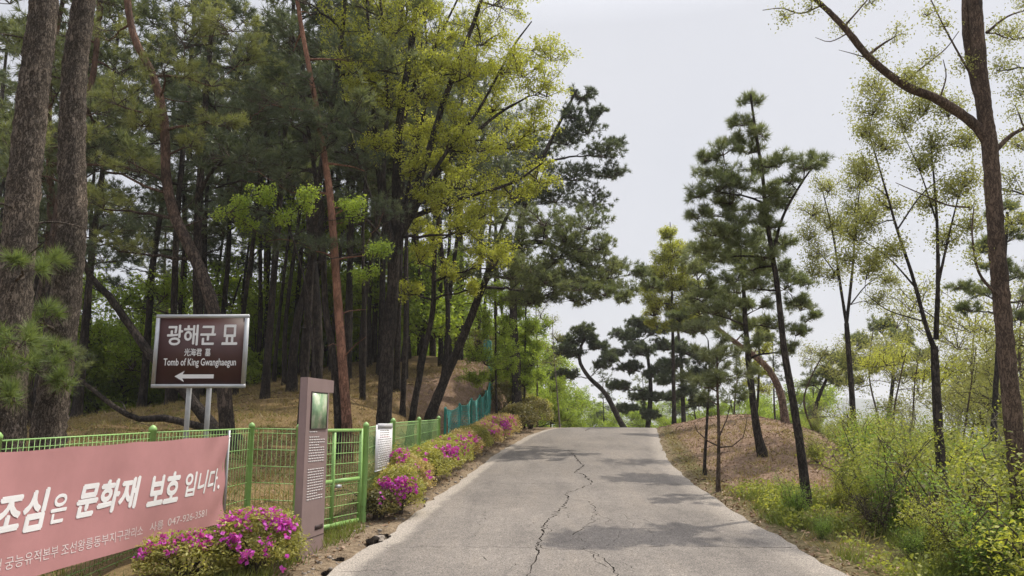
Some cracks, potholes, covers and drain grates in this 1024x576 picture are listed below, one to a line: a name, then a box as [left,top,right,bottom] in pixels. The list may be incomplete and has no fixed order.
crack [515,453,649,576]
